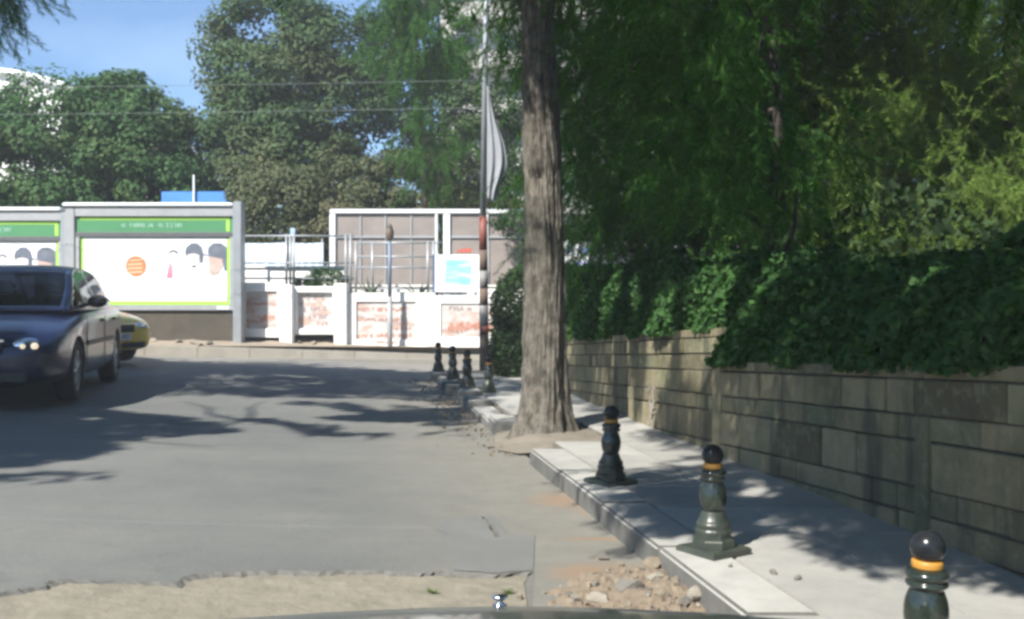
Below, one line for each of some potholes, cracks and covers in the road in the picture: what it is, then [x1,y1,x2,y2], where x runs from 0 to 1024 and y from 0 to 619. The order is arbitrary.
crack [481,517,499,537]
